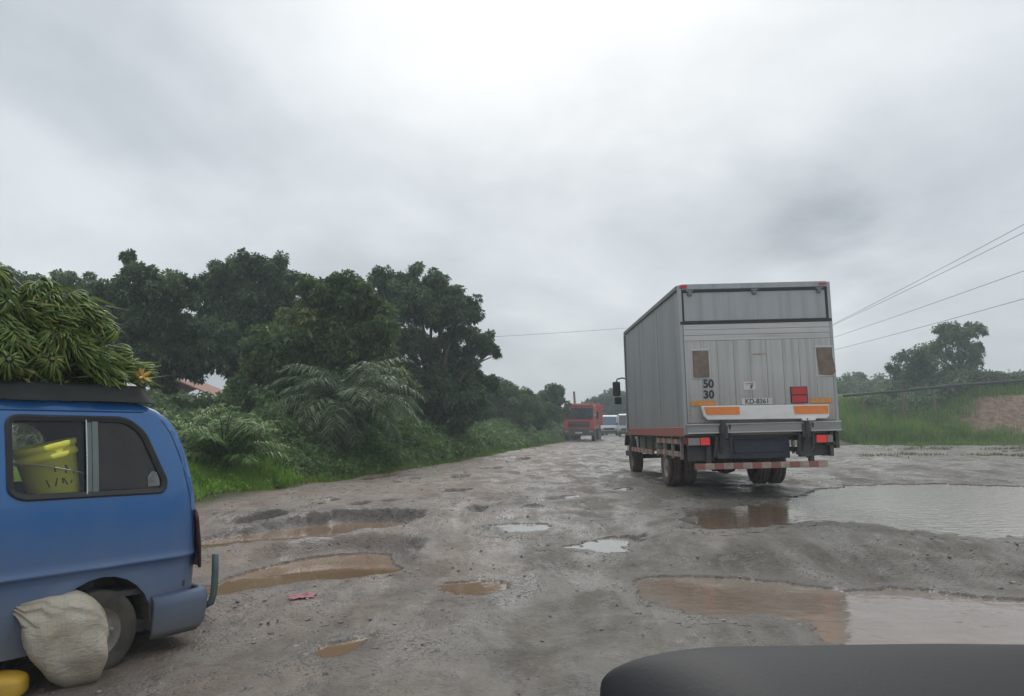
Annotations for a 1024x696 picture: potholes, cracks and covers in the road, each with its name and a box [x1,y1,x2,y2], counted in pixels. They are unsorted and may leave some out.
pothole [408,570,539,605]
pothole [446,501,505,515]
pothole [535,526,662,567]
pothole [604,567,1024,646]
pothole [200,505,447,559]
pothole [520,492,601,504]
pothole [666,482,1024,543]
